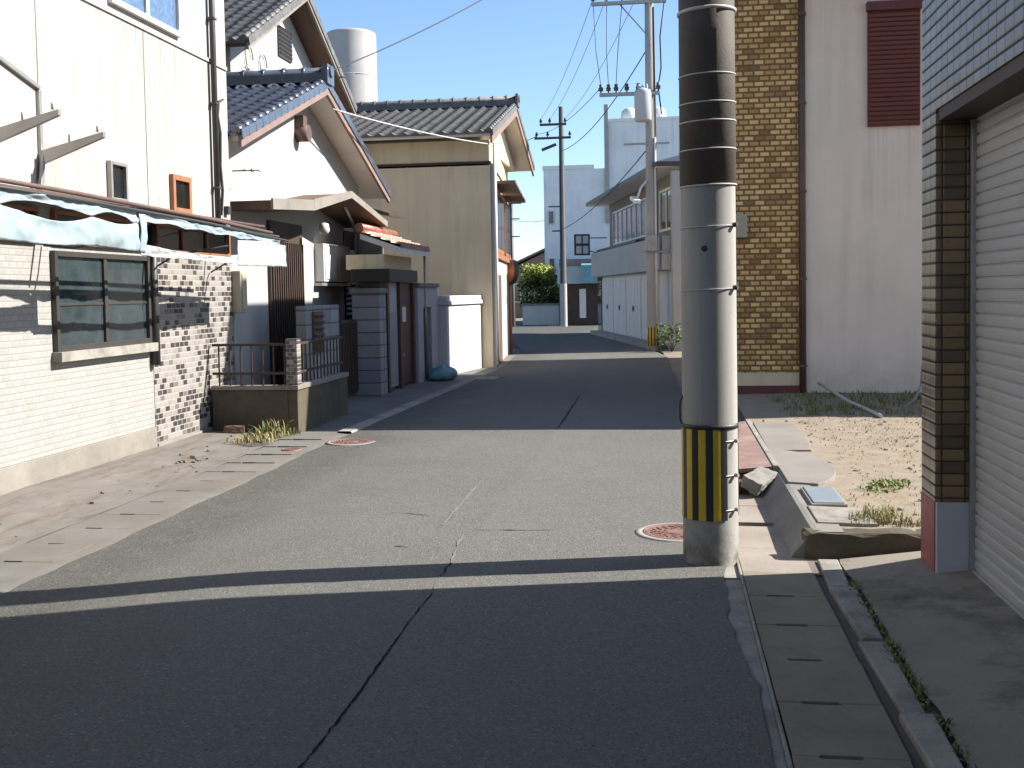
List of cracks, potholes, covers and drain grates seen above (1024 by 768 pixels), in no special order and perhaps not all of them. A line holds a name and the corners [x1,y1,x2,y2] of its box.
crack [298,478,554,768]
manhole cover [326,438,376,446]
manhole cover [635,523,683,542]
